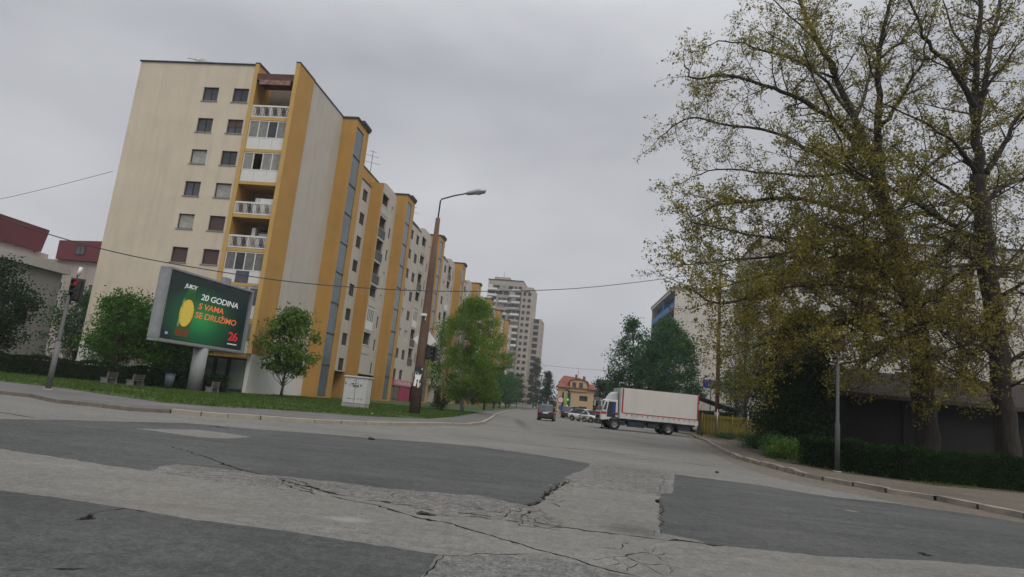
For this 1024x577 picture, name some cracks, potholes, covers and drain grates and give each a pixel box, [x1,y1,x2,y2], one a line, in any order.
crack [165,444,721,577]
